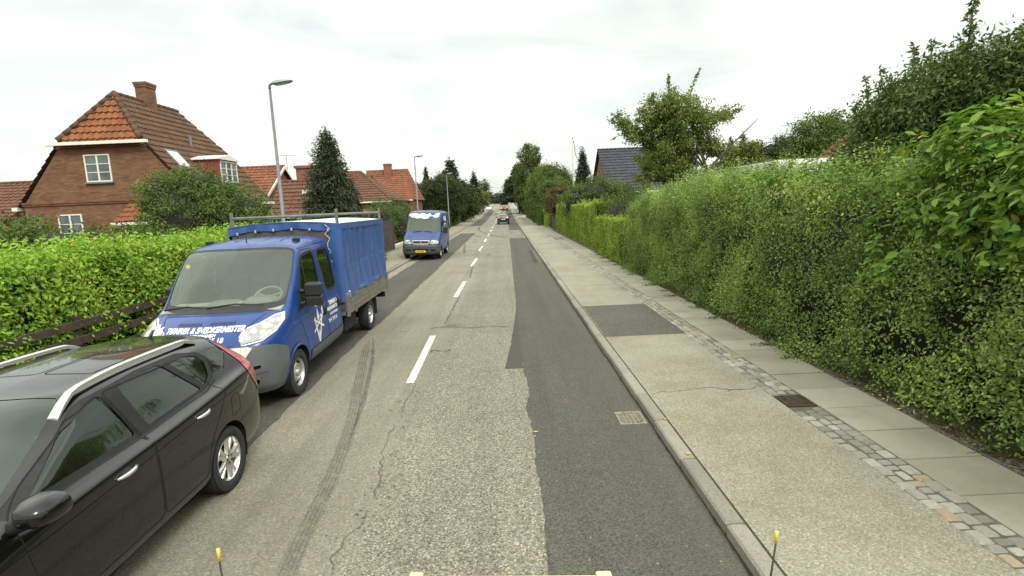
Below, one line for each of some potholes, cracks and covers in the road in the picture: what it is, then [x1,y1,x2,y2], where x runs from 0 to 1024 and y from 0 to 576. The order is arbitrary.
drain grate [614,411,648,425]
drain grate [774,395,817,408]
